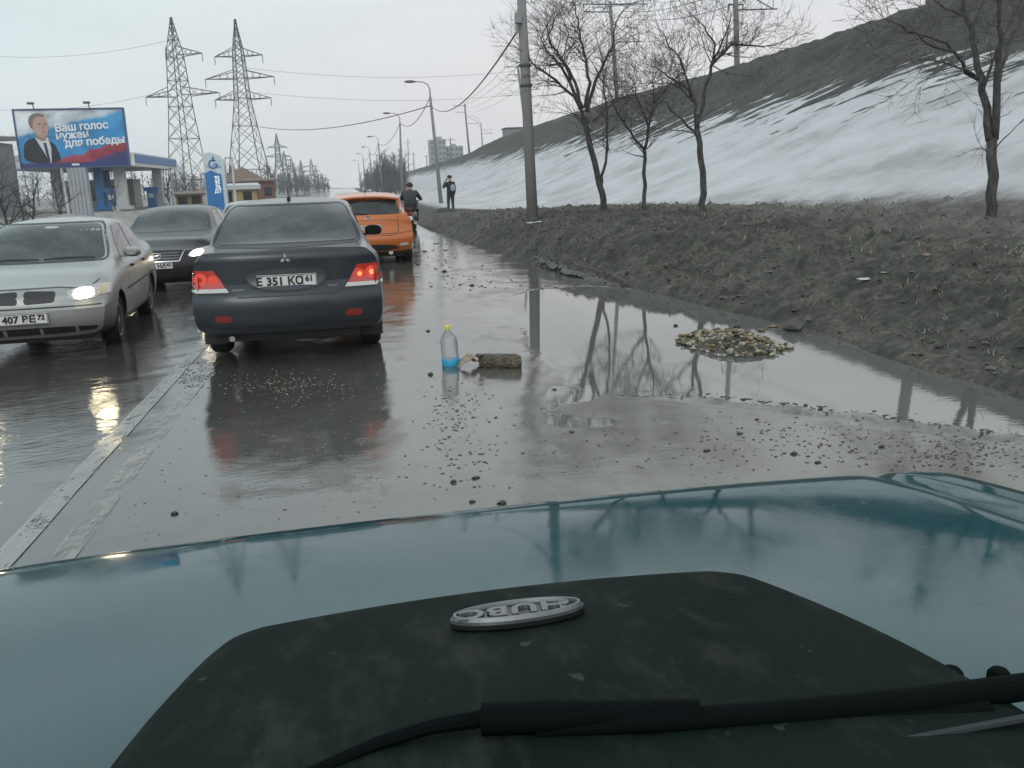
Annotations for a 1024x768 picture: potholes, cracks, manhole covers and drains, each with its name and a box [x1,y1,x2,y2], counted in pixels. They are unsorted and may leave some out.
pothole [507,286,995,433]
